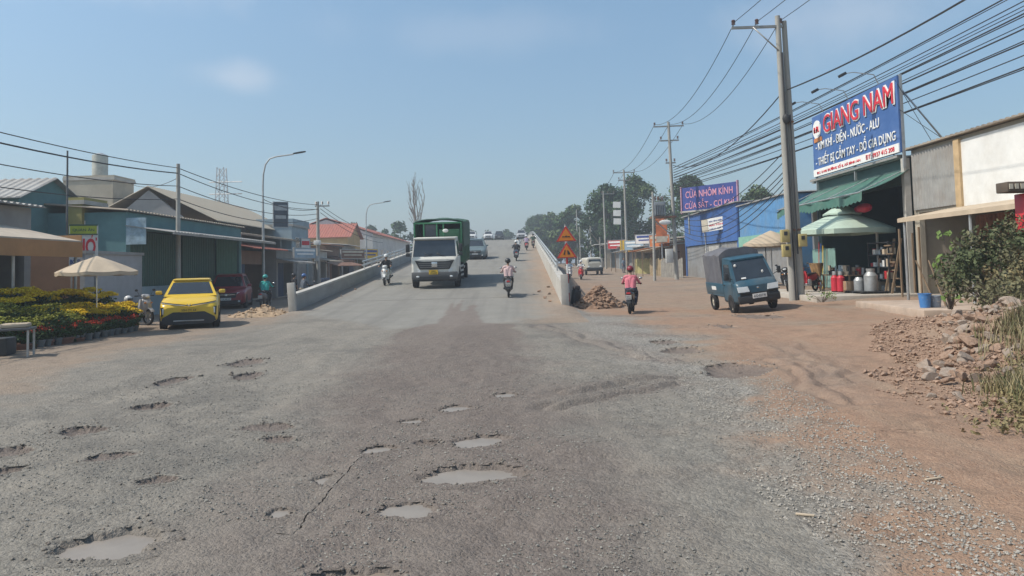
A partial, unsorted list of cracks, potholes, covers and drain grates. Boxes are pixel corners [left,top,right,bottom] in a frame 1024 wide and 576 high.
pothole [119,472,195,488]
pothole [10,513,195,569]
pothole [688,360,792,382]
pothole [223,370,270,382]
pothole [352,442,409,455]
pothole [0,462,40,477]
pothole [432,403,480,414]
pothole [357,495,462,522]
pothole [144,374,204,389]
pothole [0,442,46,459]
pothole [650,345,712,356]
pothole [437,430,526,451]
